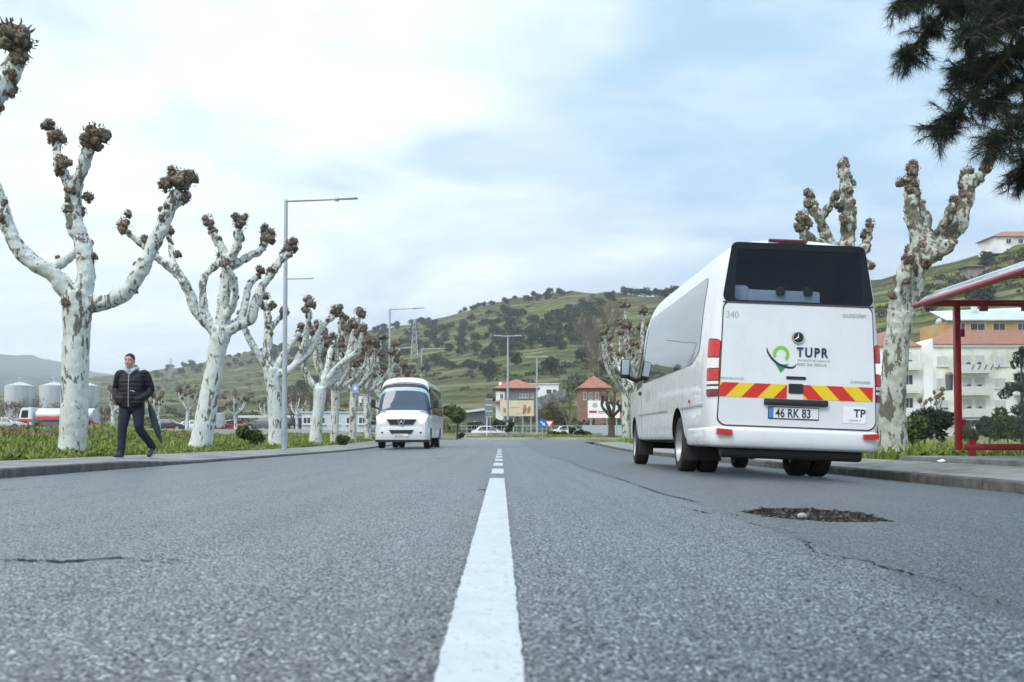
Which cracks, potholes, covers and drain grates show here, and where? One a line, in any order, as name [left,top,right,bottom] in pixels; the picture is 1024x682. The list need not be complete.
pothole [740,507,894,523]
crack [524,449,1021,610]
